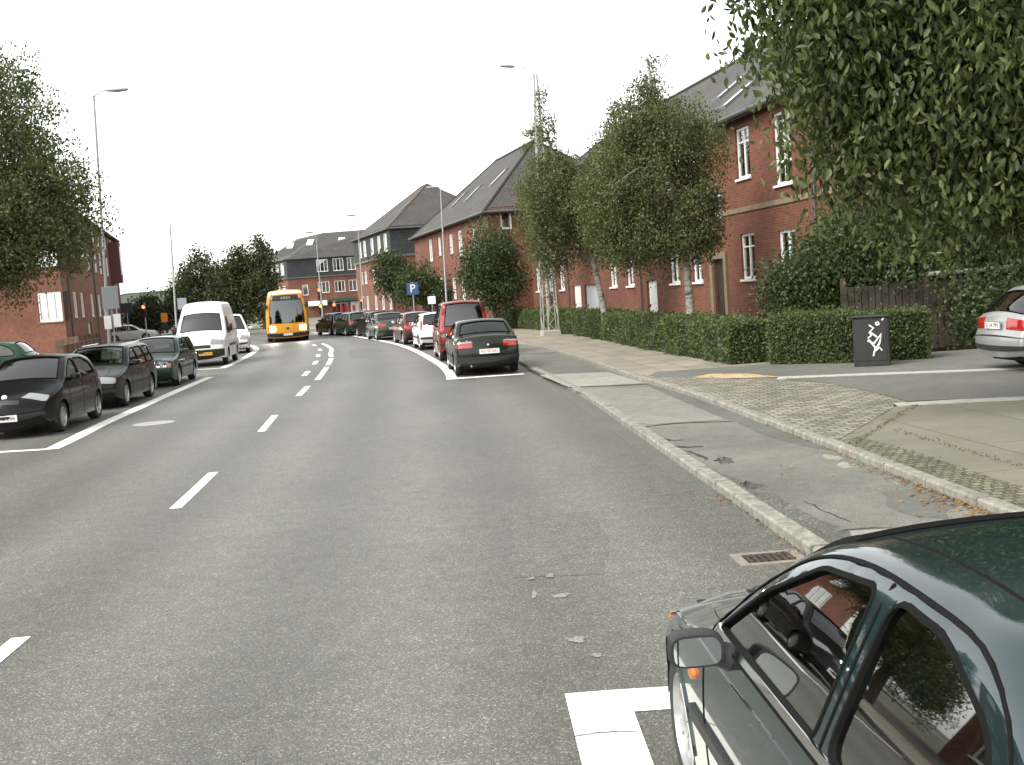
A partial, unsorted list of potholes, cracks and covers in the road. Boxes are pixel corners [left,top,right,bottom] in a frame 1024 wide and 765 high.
crack [659,435,708,459]
pothole [740,480,767,490]
pothole [713,456,734,464]
drain grate [729,549,805,567]
crack [803,500,888,530]
